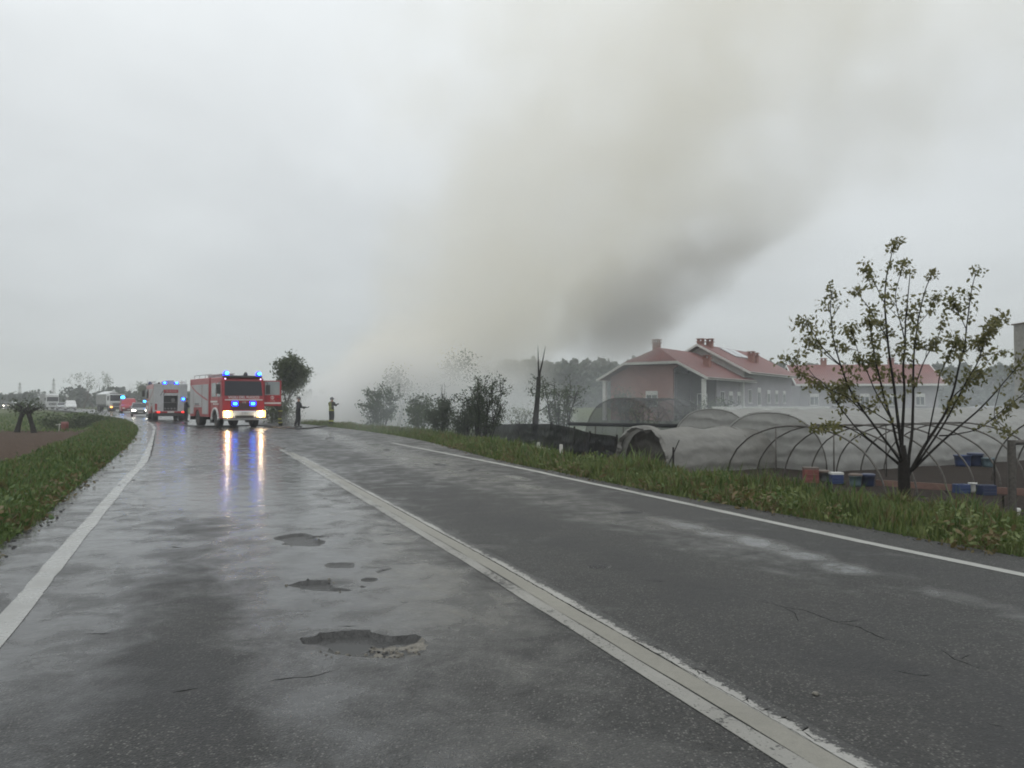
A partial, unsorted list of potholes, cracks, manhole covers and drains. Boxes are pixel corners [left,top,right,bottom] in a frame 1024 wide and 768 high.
pothole [300,629,429,658]
pothole [285,578,352,592]
pothole [273,532,327,546]
crack [758,600,902,642]
